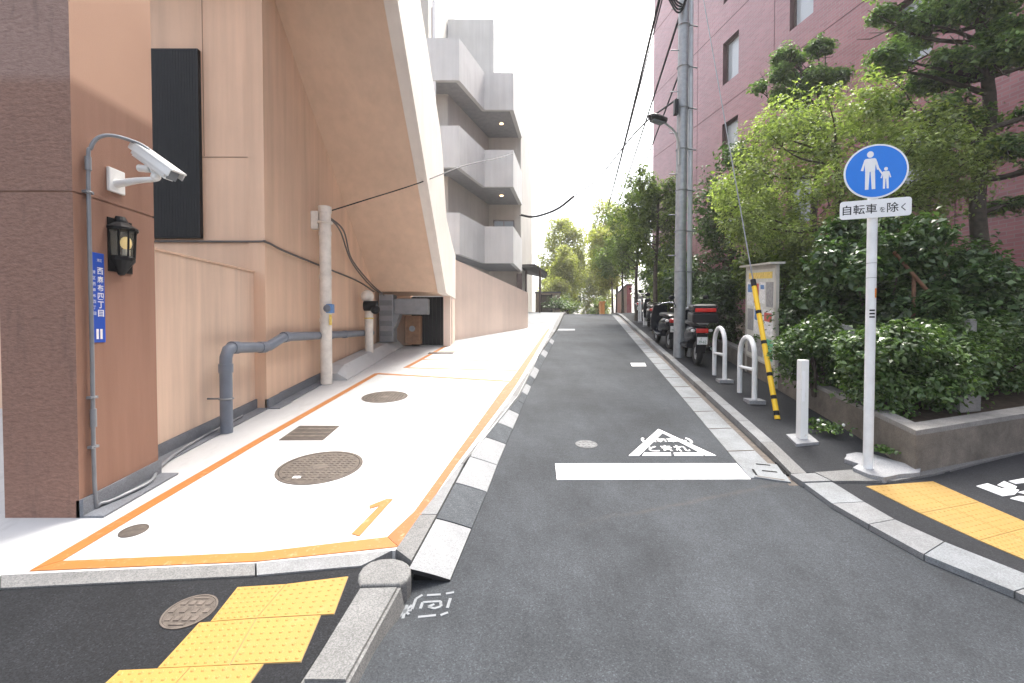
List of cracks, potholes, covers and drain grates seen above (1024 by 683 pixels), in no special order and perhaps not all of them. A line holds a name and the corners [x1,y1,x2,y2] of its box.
manhole cover [361,391,408,403]
manhole cover [274,451,363,485]
drain grate [279,426,339,440]
manhole cover [159,594,218,630]
utility cover [575,440,597,448]
manhole cover [118,524,149,538]
